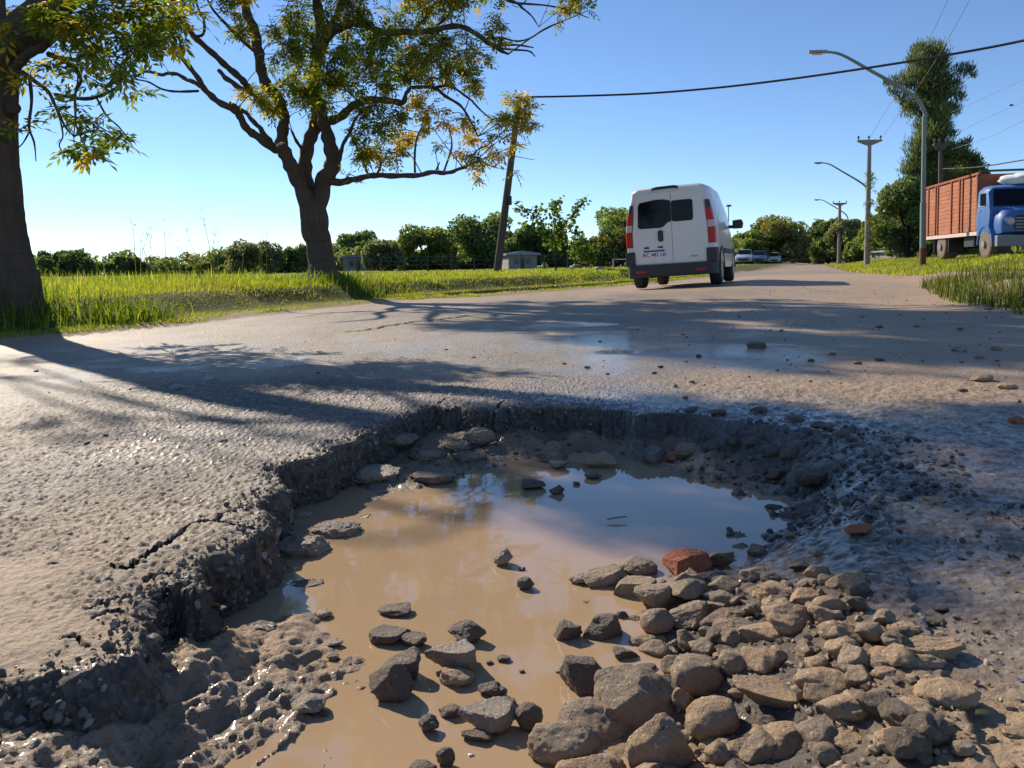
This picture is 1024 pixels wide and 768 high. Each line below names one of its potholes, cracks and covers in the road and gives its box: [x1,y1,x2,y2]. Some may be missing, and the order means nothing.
crack [106,507,255,583]
pothole [0,402,1001,768]
